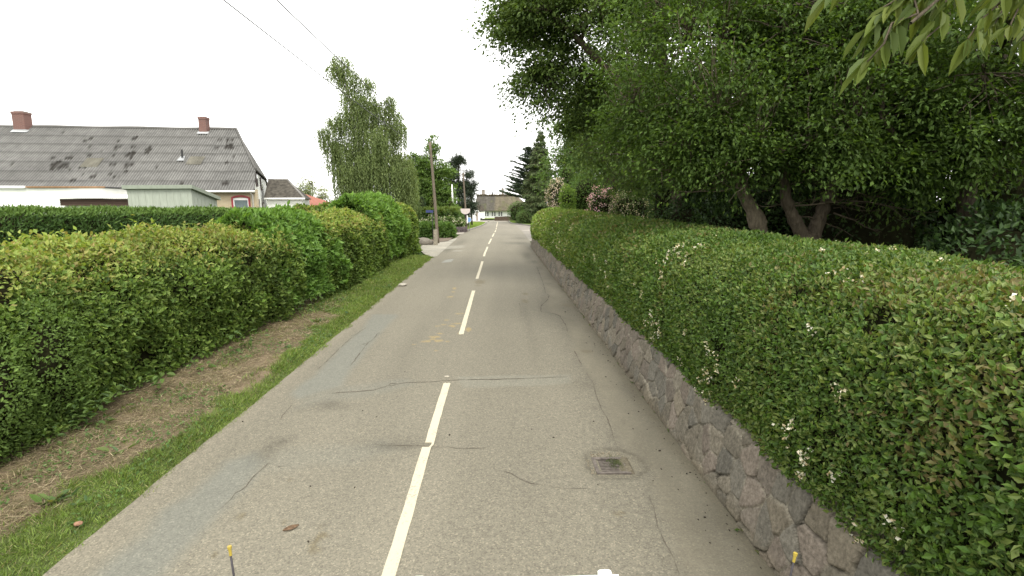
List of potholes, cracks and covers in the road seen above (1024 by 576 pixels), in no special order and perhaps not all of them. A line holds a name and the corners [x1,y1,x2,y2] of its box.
drain grate [586,452,635,475]
crack [336,351,614,438]
